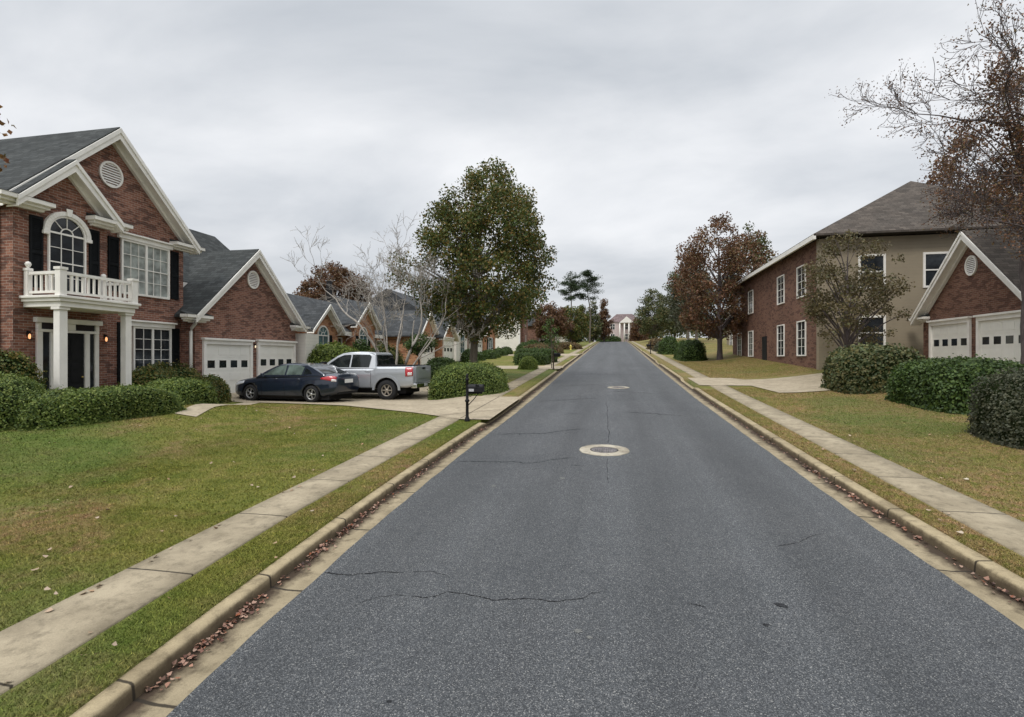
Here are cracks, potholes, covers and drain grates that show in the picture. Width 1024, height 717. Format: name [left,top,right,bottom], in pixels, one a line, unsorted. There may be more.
crack [517,374,595,435]
manhole cover [579,444,630,456]
crack [325,571,601,604]
